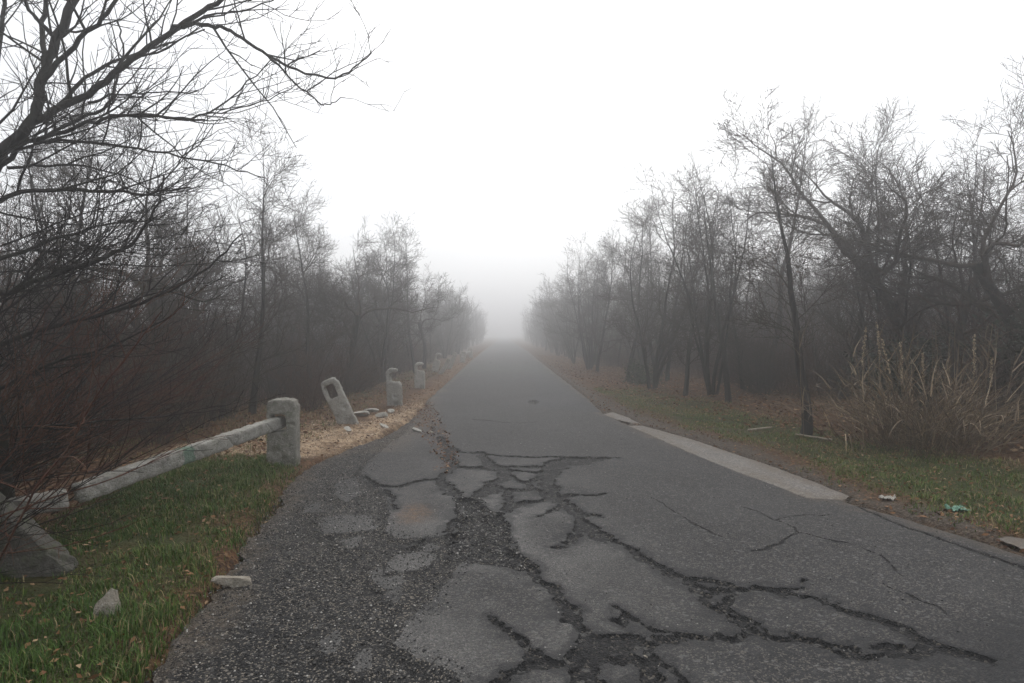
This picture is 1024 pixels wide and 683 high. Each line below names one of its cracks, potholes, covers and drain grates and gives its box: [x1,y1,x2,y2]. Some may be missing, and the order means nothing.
crack [360,419,1024,683]
pothole [446,497,540,573]
